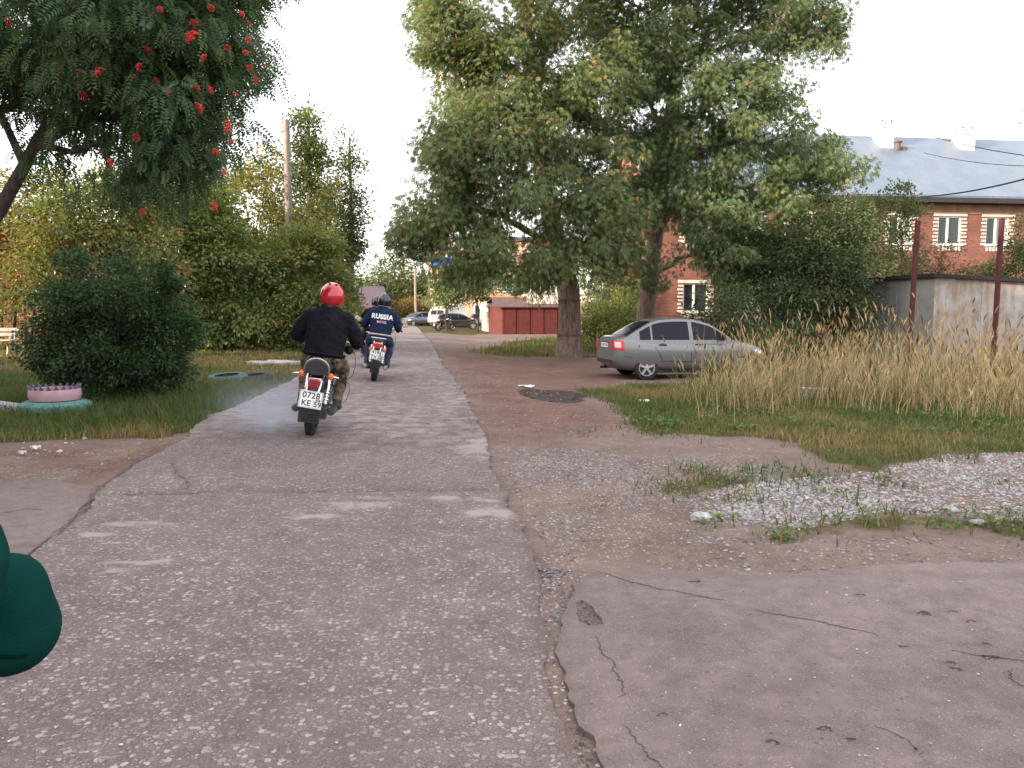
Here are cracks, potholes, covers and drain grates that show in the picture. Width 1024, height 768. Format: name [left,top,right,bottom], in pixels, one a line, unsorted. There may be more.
crack [623,725,664,768]
crack [597,571,724,600]
crack [756,610,879,636]
pothole [576,600,603,626]
crack [28,451,189,554]
crack [595,636,626,696]
crack [952,650,1024,686]
